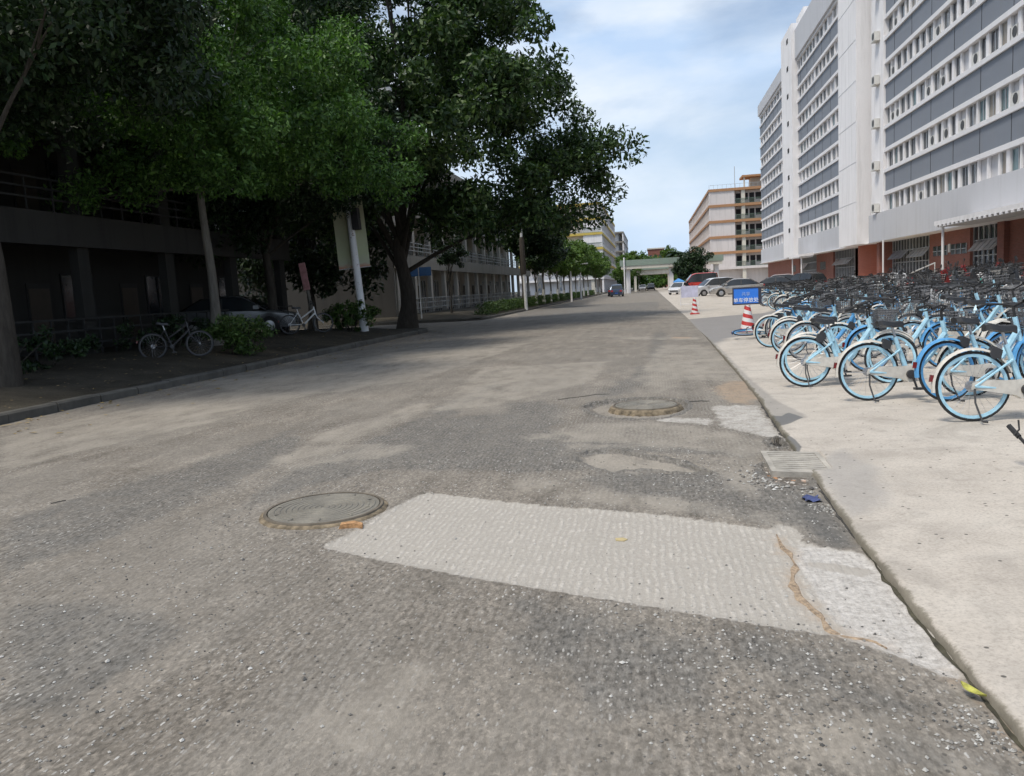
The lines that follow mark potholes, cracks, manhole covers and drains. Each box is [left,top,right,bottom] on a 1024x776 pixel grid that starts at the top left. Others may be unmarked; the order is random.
manhole cover [258,492,388,530]
crack [776,534,887,649]
drain grate [760,451,832,478]
